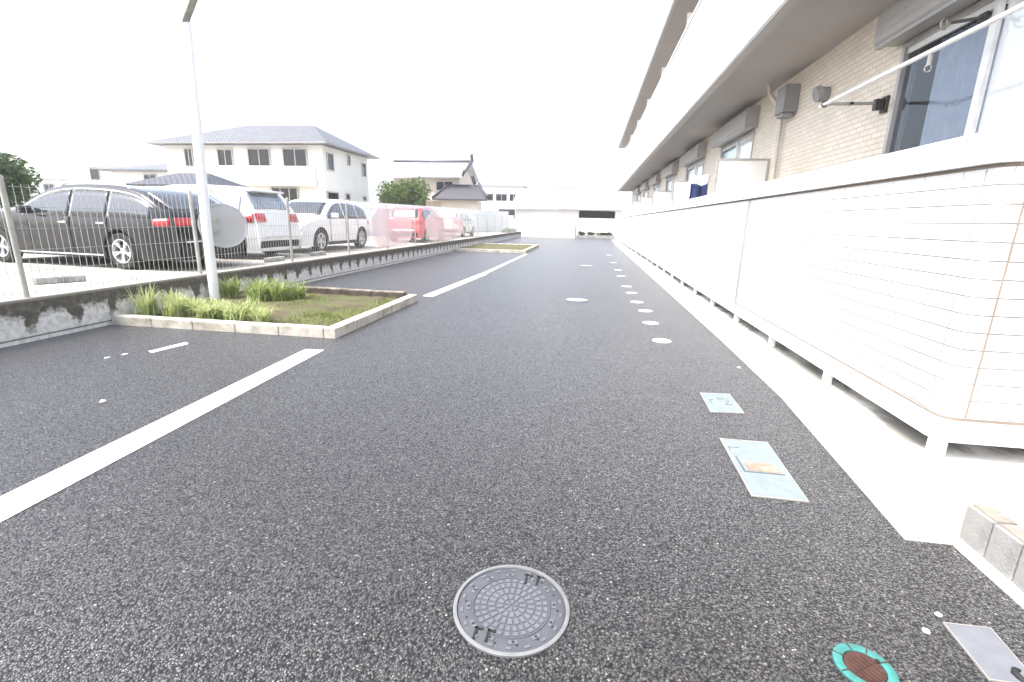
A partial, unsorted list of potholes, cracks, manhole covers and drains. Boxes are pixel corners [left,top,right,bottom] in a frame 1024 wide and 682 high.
utility cover [700,392,744,414]
utility cover [943,622,1024,682]
utility cover [720,438,809,503]
manhole cover [453,565,570,658]
utility cover [832,642,899,682]
